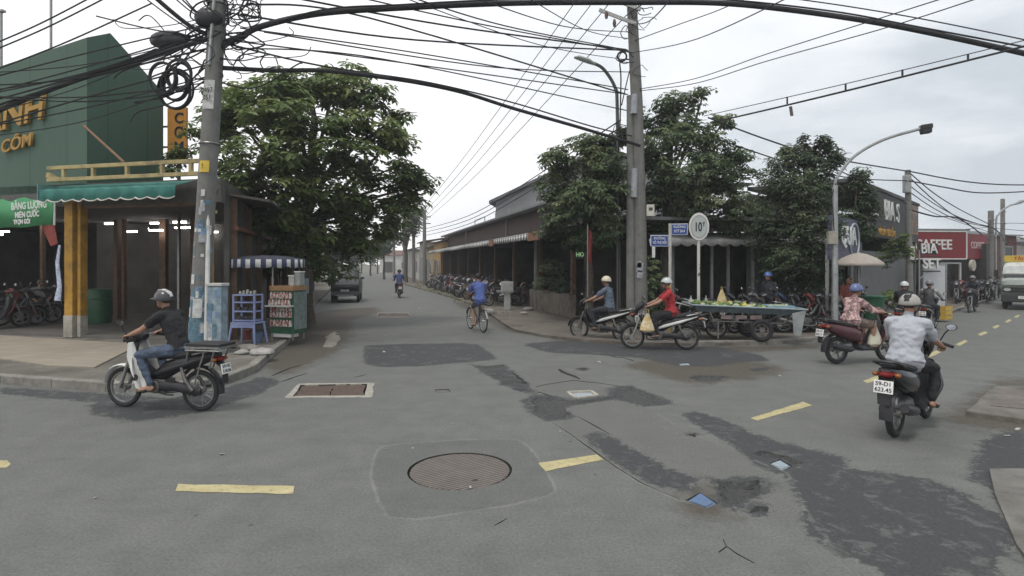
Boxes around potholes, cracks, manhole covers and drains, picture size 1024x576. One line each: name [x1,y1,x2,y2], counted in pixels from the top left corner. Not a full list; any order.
manhole cover [566,390,599,399]
manhole cover [687,493,717,508]
manhole cover [770,459,792,470]
manhole cover [284,383,375,398]
pothole [717,480,761,506]
manhole cover [407,453,512,490]
